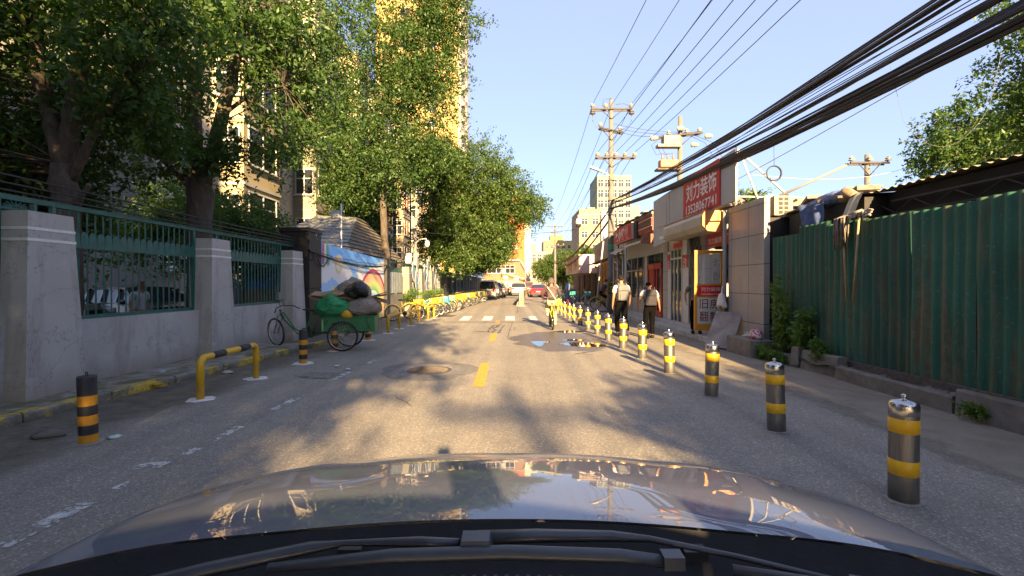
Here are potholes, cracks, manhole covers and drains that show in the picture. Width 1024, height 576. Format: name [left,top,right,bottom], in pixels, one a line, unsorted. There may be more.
manhole cover [381,362,479,381]
